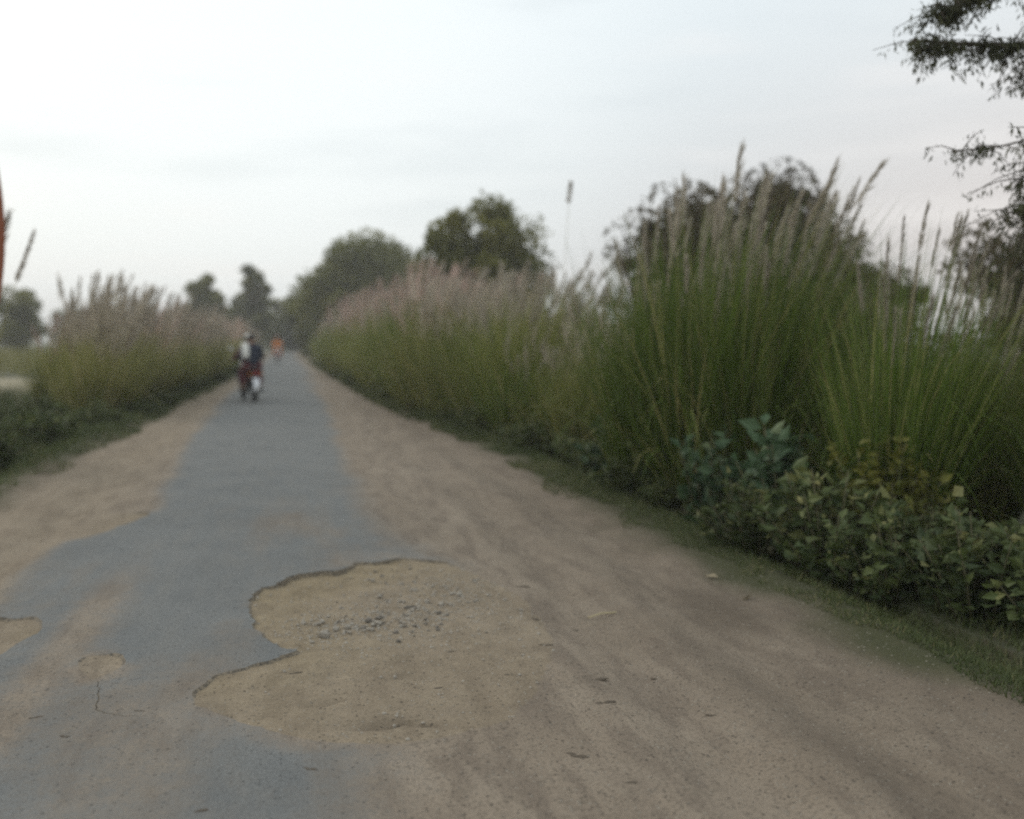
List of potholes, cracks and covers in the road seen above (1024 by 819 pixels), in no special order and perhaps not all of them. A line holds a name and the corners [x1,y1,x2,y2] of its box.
crack [95,682,132,717]
pothole [0,616,42,655]
pothole [192,558,554,744]
pothole [77,653,126,679]
